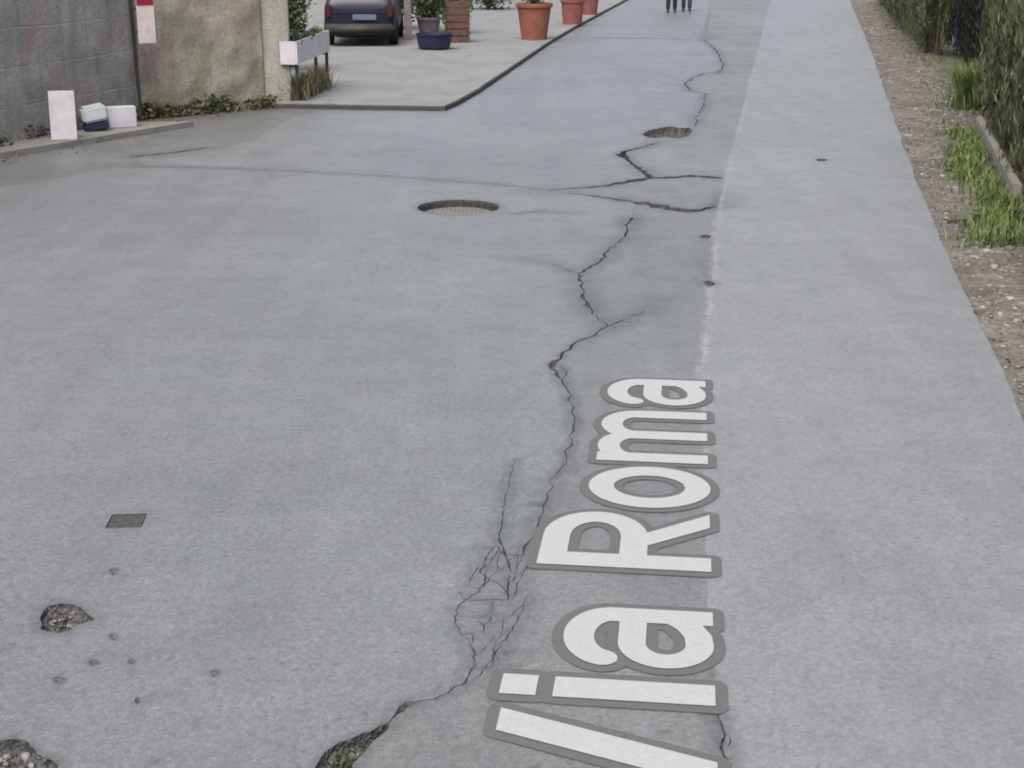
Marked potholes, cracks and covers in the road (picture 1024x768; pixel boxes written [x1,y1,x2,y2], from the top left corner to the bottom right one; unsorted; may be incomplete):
manhole cover [417,200,499,215]
pothole [643,126,692,143]
pothole [0,738,58,768]
crack [389,143,723,723]
pothole [315,723,389,768]
pothole [40,603,94,633]
crack [659,38,724,125]
crack [717,715,731,759]
manhole cover [106,514,147,528]
